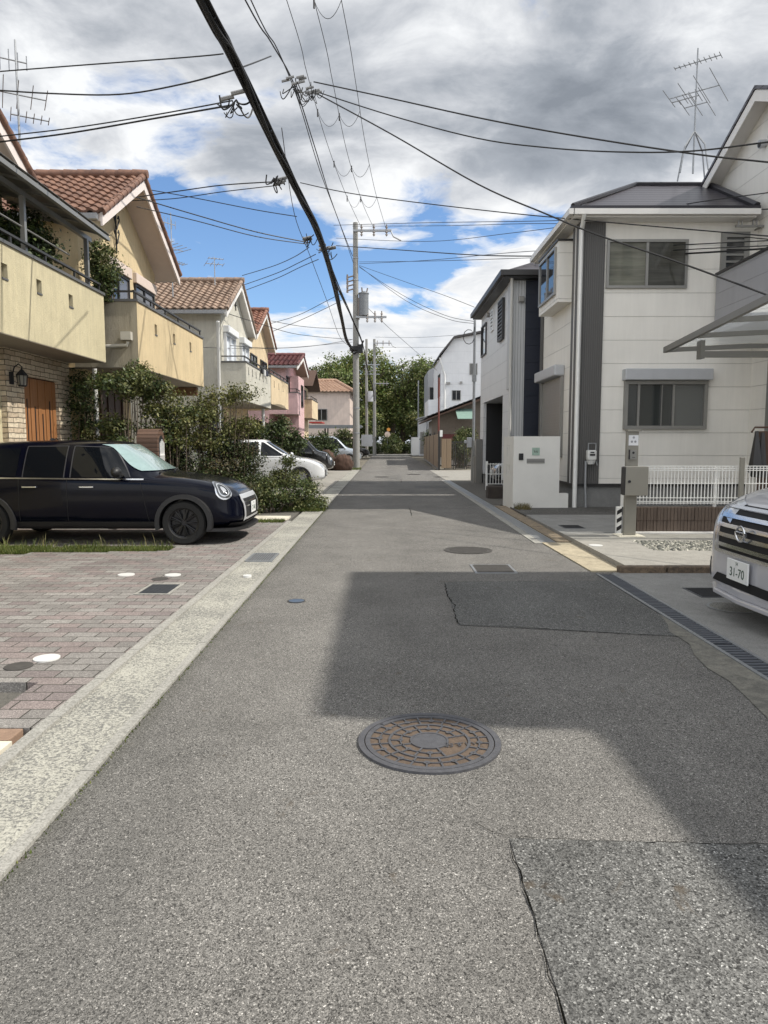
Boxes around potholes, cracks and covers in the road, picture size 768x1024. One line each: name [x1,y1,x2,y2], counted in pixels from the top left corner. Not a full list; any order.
manhole cover [358,713,501,775]
drain grate [245,553,279,562]
crack [445,581,662,636]
drain grate [596,573,768,681]
utility cover [3,662,34,671]
manhole cover [470,564,518,573]
crack [473,821,763,1024]
manhole cover [444,546,492,554]
